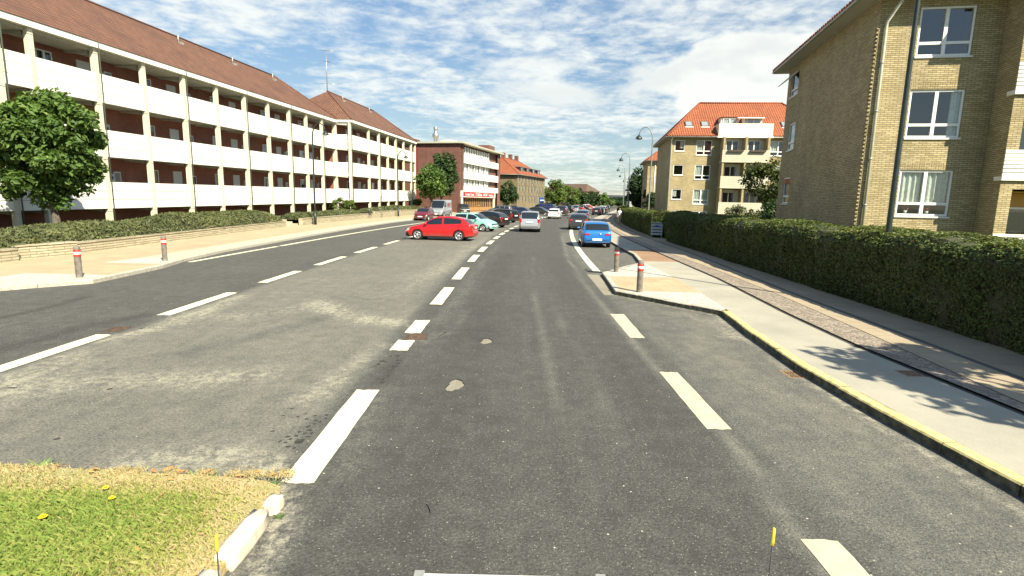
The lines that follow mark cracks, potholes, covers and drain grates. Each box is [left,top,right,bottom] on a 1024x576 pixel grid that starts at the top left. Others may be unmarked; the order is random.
drain grate [779,370,807,378]
